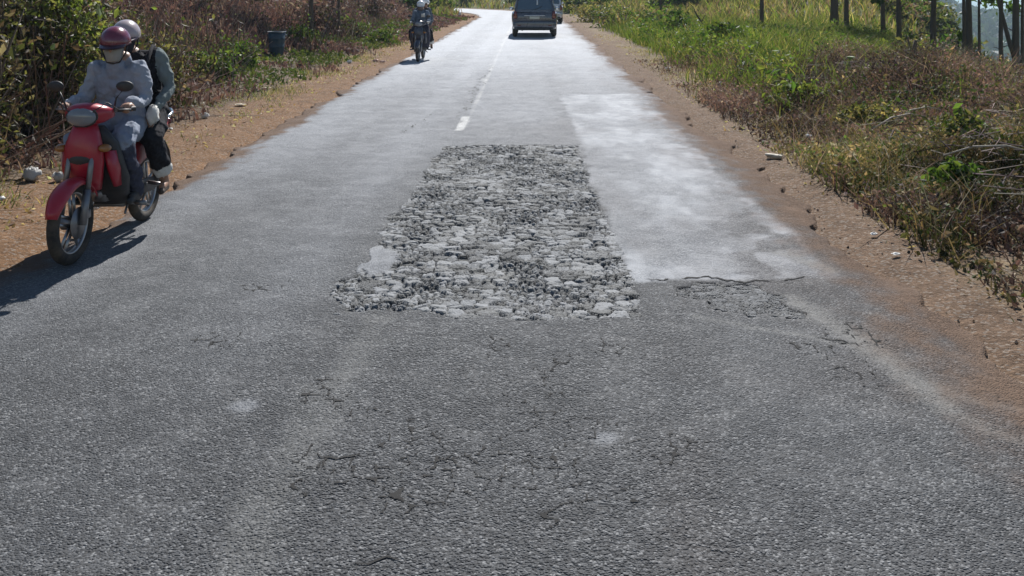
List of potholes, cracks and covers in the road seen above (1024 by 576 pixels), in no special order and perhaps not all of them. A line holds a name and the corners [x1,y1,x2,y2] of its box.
crack [283,335,710,528]
crack [789,322,886,386]
